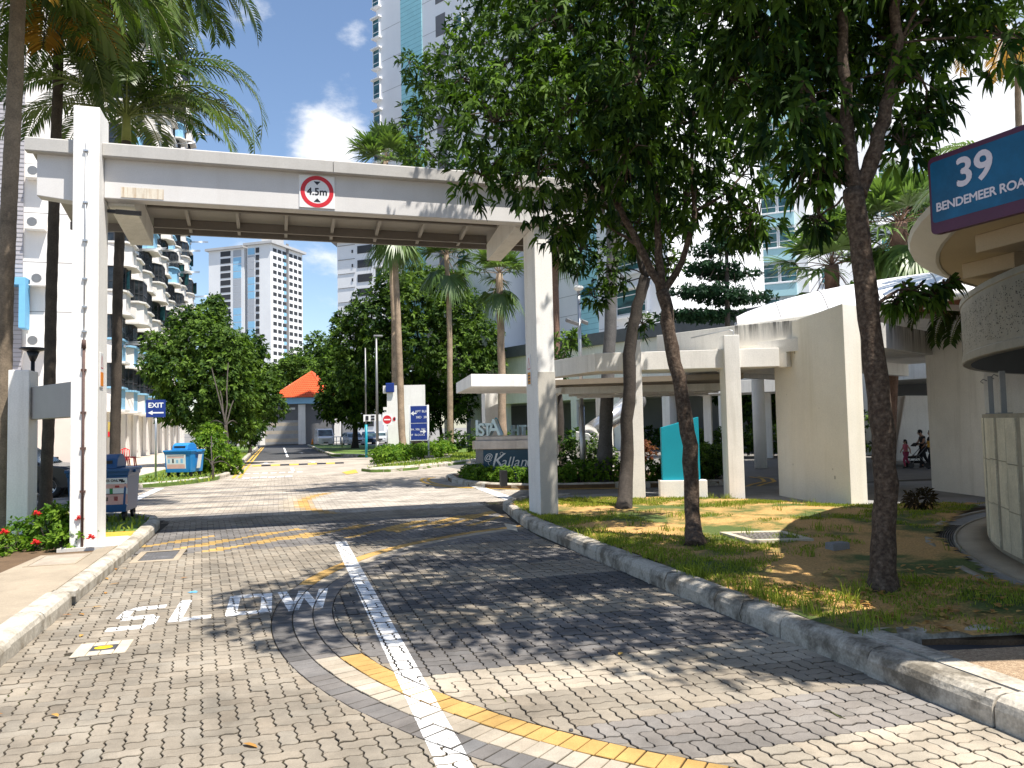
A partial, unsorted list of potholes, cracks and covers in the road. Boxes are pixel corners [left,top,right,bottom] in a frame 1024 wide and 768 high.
manhole cover [129,549,186,563]
